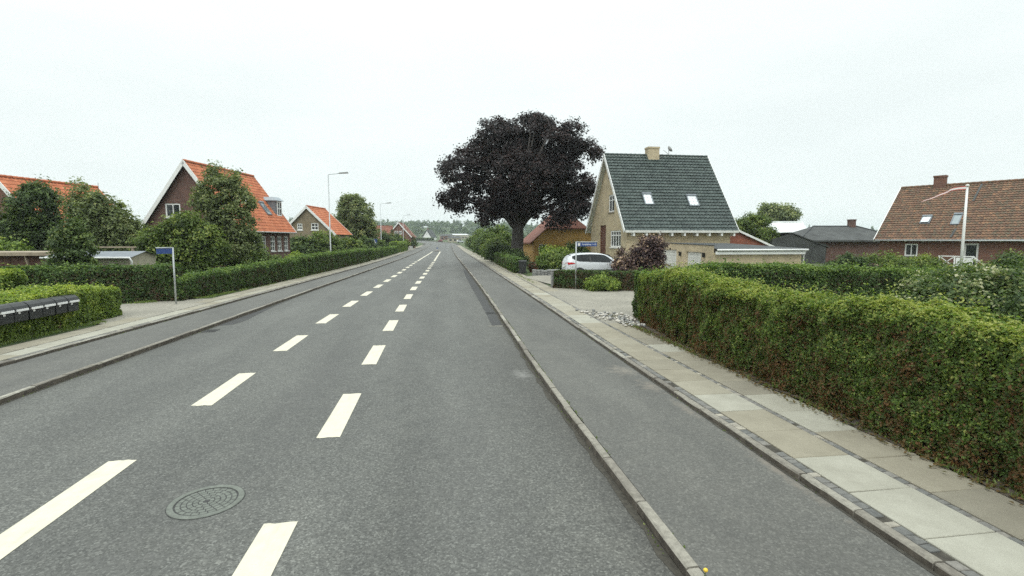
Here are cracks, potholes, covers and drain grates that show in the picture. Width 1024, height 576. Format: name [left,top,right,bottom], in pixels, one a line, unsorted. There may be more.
manhole cover [165,485,246,520]
